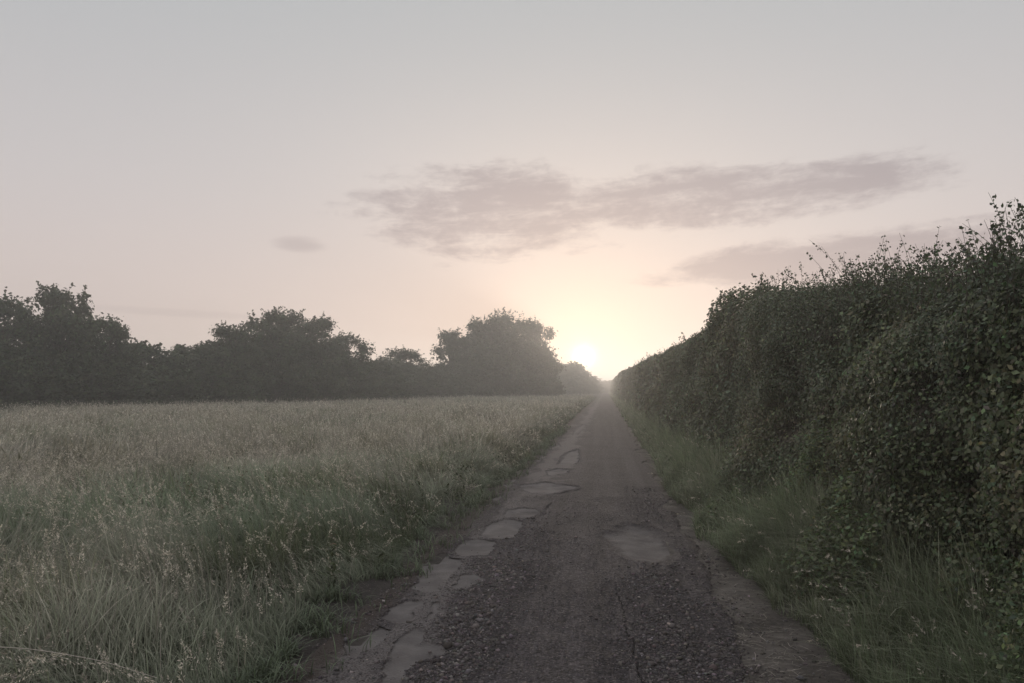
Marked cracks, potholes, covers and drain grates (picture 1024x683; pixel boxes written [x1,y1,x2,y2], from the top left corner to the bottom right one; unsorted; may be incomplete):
crack [613,585,648,683]
